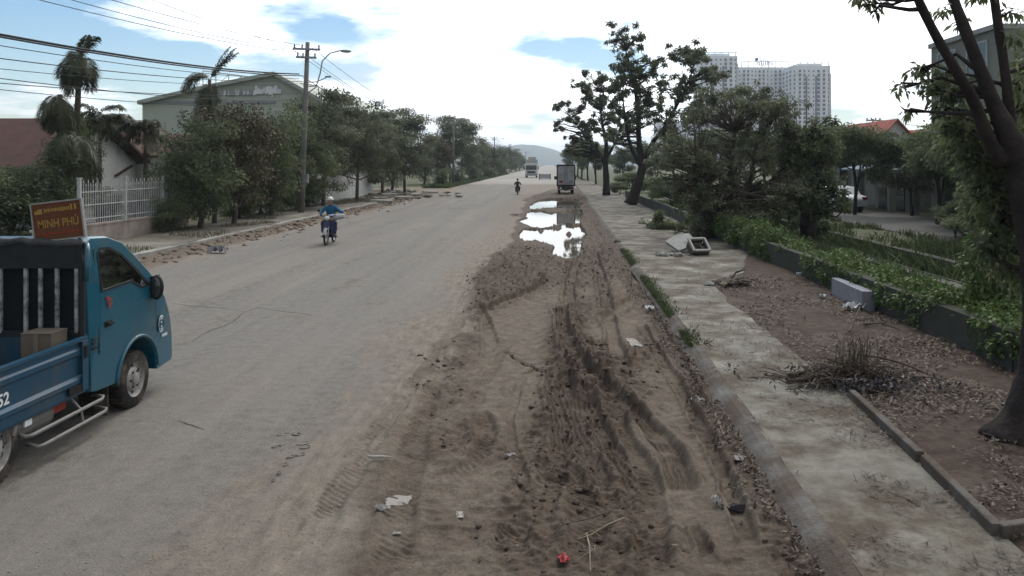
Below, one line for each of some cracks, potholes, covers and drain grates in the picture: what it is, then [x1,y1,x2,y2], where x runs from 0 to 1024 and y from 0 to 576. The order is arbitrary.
pothole [519,208,584,228]
pothole [529,198,583,209]
pothole [519,223,587,258]
